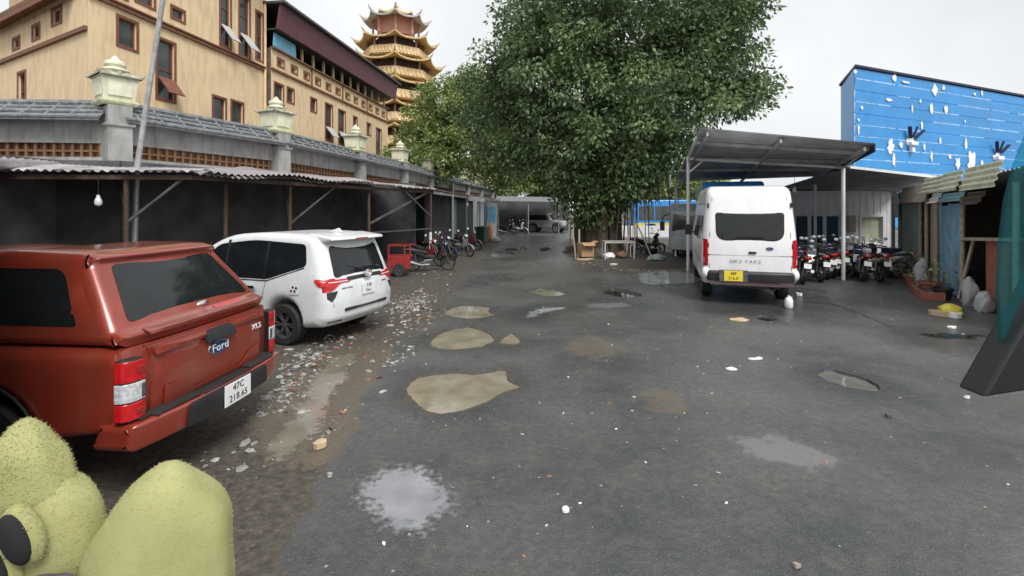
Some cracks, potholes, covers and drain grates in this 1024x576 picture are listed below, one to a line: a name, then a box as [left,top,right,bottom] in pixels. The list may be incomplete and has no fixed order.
pothole [601,288,642,297]
pothole [816,369,880,391]
